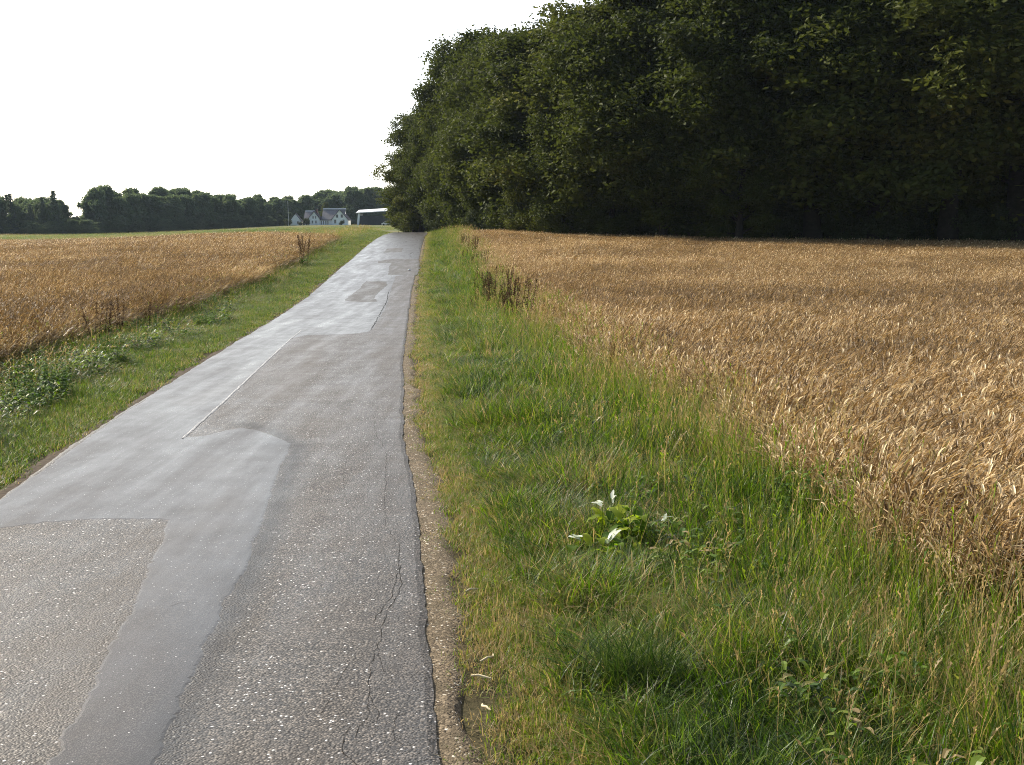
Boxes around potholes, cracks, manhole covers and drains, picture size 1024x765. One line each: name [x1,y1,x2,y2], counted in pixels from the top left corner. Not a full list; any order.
crack [316,417,419,765]
